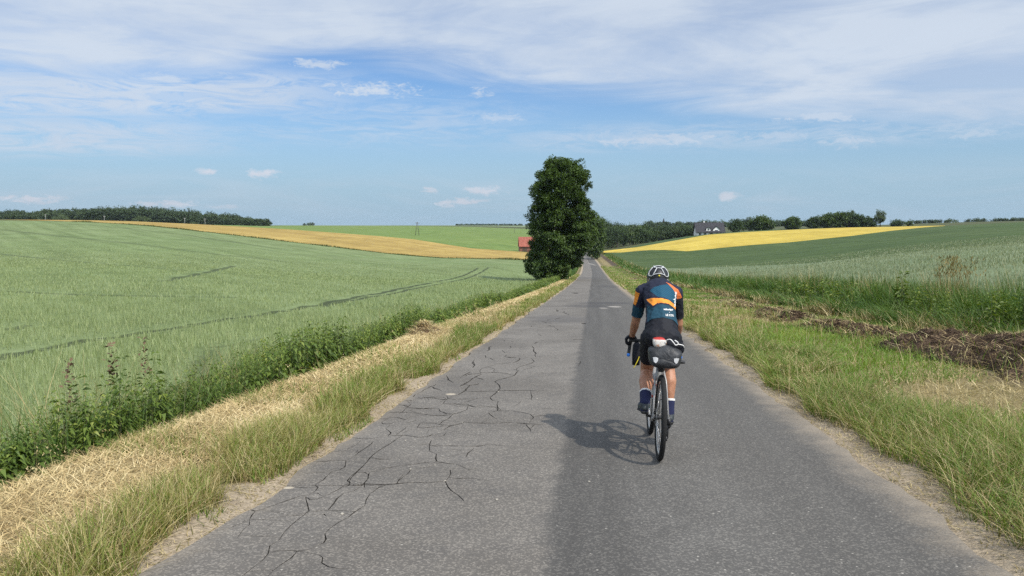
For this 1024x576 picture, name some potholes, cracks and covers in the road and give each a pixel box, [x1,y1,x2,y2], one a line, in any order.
crack [240,360,550,571]
